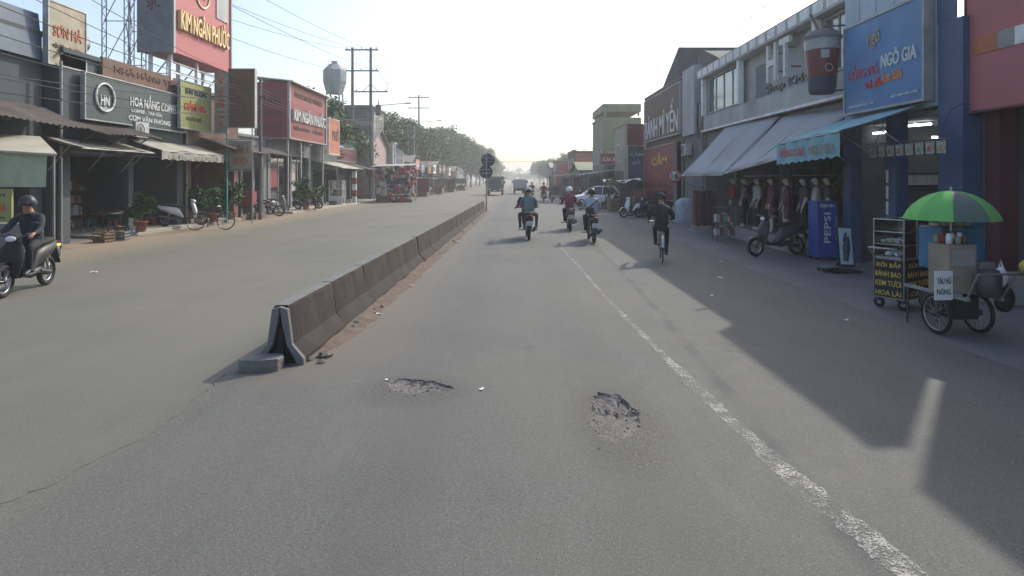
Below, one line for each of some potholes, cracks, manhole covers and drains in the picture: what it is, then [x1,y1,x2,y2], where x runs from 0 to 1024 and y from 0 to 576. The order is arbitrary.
pothole [379,378,454,397]
pothole [585,390,649,450]
crack [2,374,225,504]
